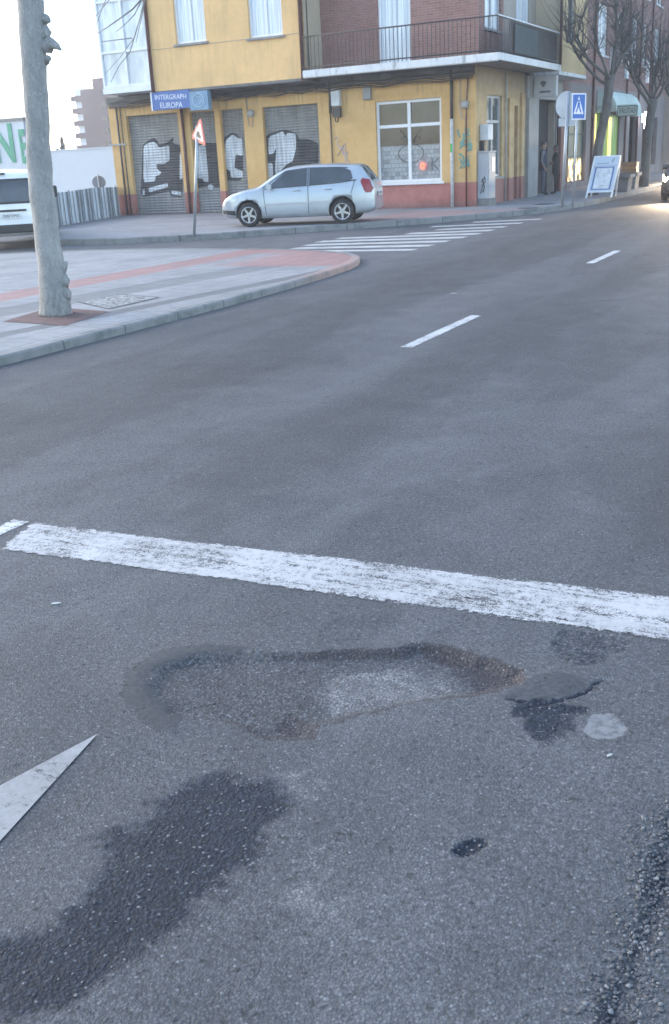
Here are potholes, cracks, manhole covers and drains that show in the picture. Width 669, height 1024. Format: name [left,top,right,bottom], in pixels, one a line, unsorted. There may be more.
manhole cover [78,294,159,309]
pothole [142,641,530,744]
crack [585,811,669,1024]
pothole [448,835,492,860]
